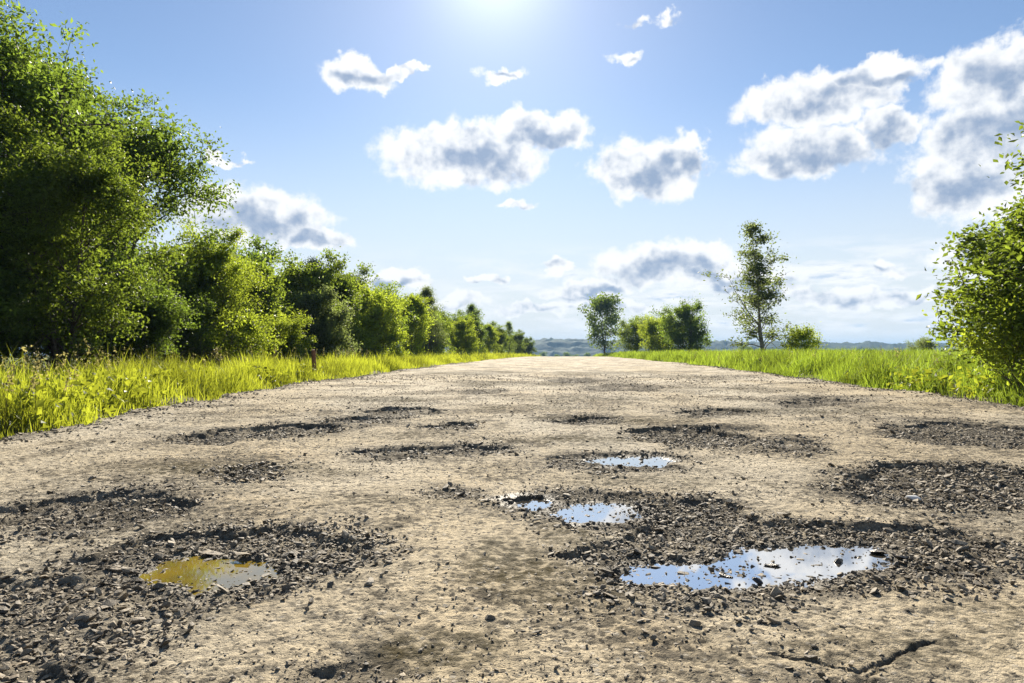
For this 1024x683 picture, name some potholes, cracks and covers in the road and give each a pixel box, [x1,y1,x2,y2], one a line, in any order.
pothole [348,443,520,462]
crack [768,640,938,677]
pothole [547,415,614,425]
pothole [487,489,667,536]
pothole [757,436,828,453]
pothole [0,489,201,538]
pothole [224,467,268,480]
pothole [629,424,757,448]
pothole [168,423,346,445]
pothole [837,462,1024,511]
pothole [358,406,442,419]
pothole [545,450,690,474]
